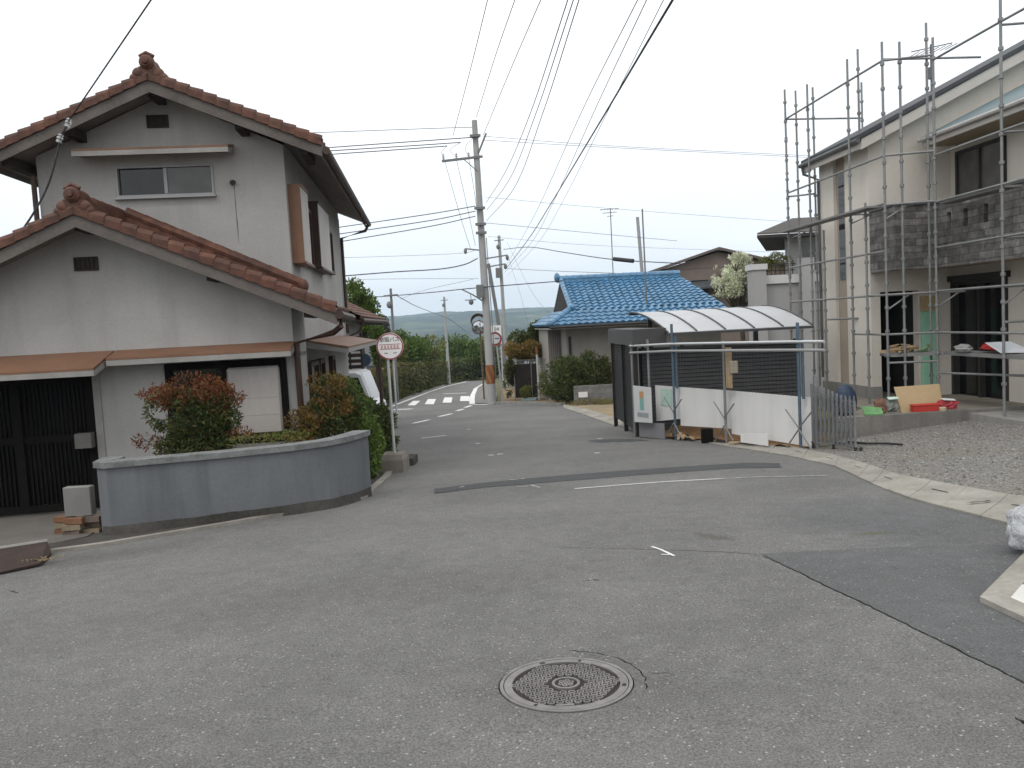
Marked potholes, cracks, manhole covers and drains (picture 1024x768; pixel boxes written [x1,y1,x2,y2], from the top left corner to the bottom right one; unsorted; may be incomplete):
crack [569,650,672,689]
manhole cover [500,657,633,713]
